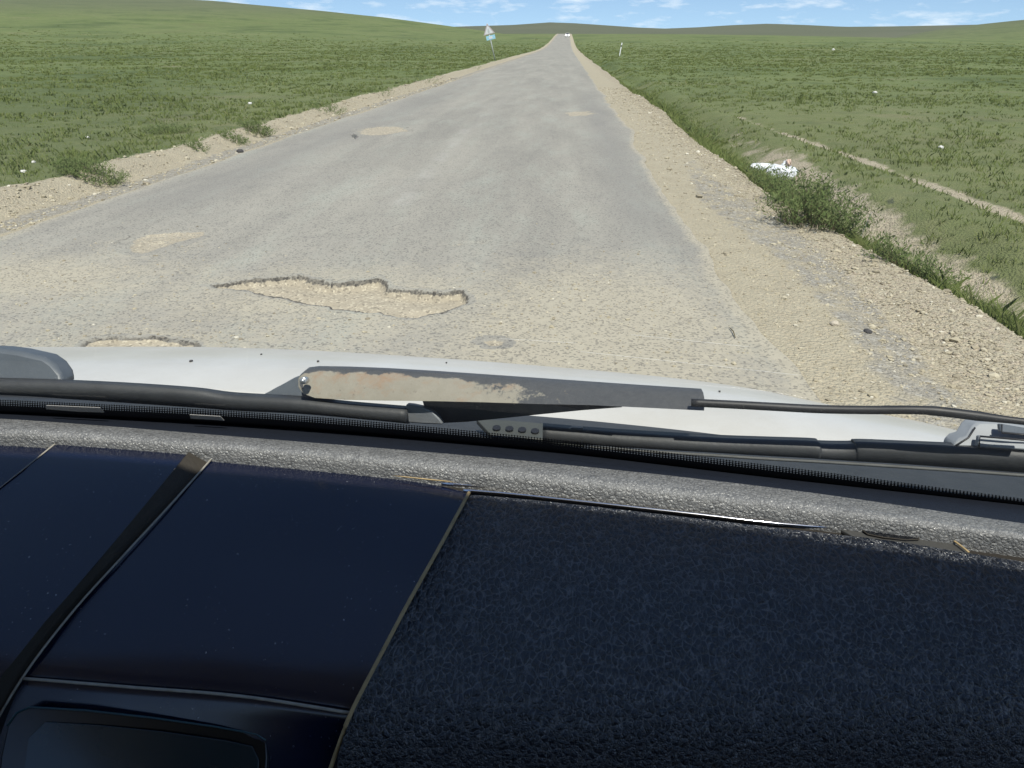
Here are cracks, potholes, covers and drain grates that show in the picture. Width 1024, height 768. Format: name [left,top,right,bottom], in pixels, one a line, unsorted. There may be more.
pothole [105,228,221,257]
pothole [470,335,516,349]
pothole [199,273,477,320]
pothole [74,333,207,347]
pothole [351,125,415,136]
